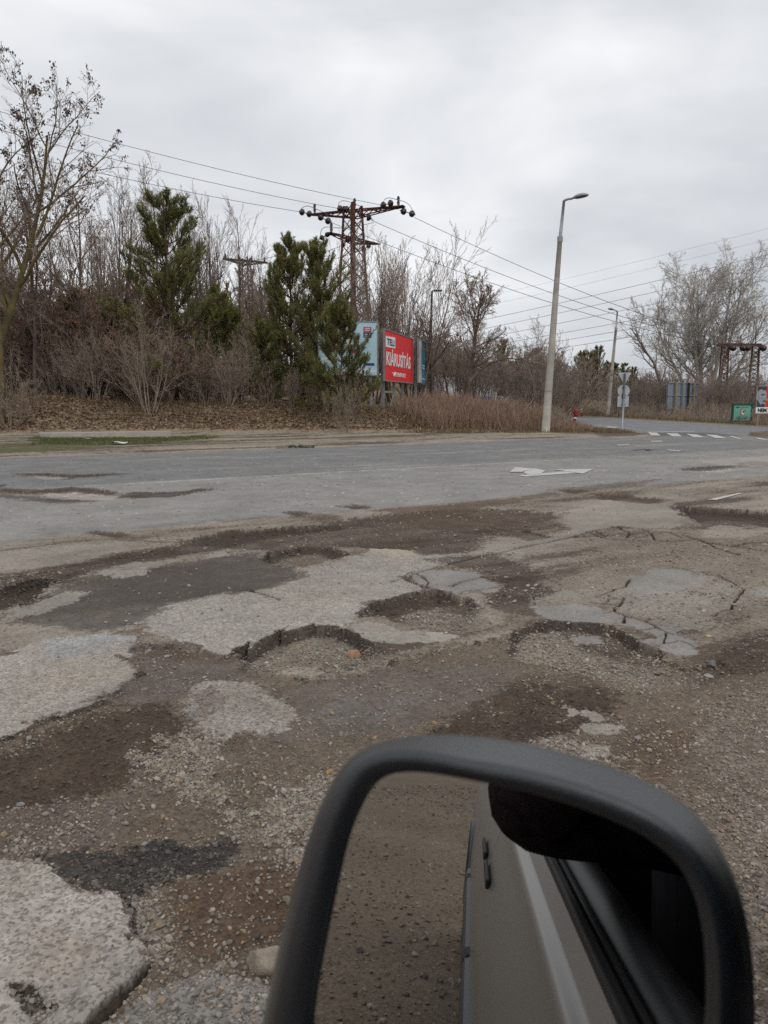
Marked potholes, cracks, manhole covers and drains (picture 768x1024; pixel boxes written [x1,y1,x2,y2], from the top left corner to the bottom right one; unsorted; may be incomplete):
crack [672,566,745,617]
pothole [357,588,489,639]
pothole [0,578,63,617]
pothole [506,620,725,697]
pothole [259,546,350,570]
pothole [231,624,400,684]
pothole [674,506,768,529]
crack [590,578,692,646]
